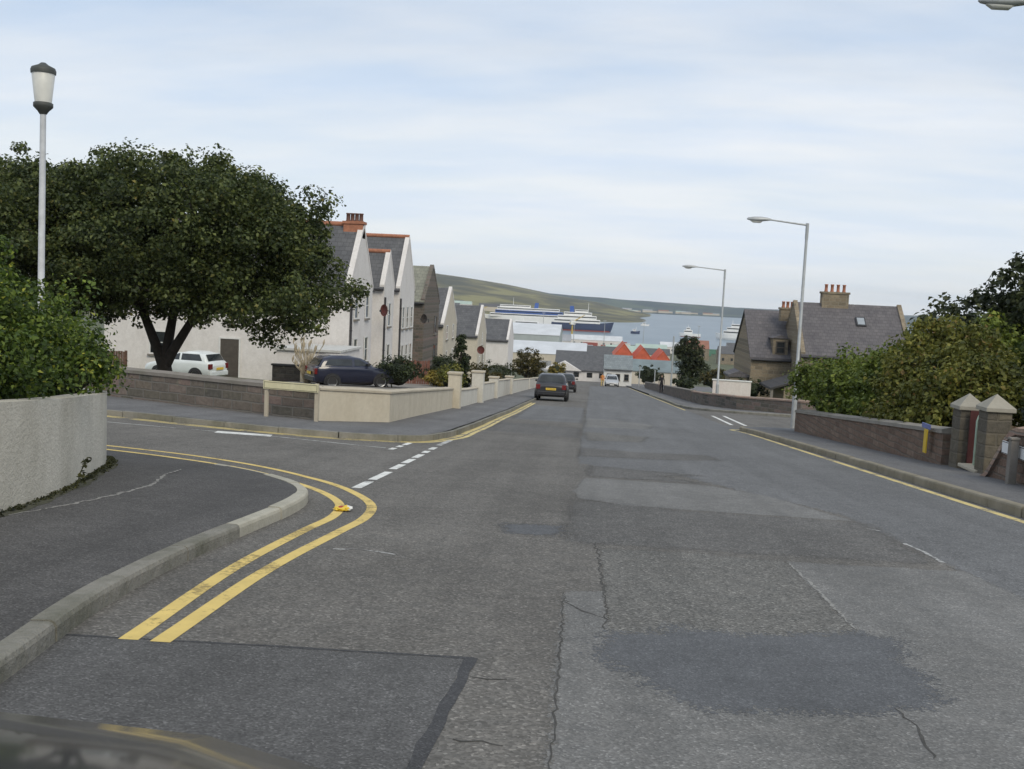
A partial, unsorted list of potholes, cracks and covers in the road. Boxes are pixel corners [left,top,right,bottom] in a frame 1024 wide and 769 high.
crack [548,543,609,769]
crack [9,469,181,515]
crack [895,708,936,758]
